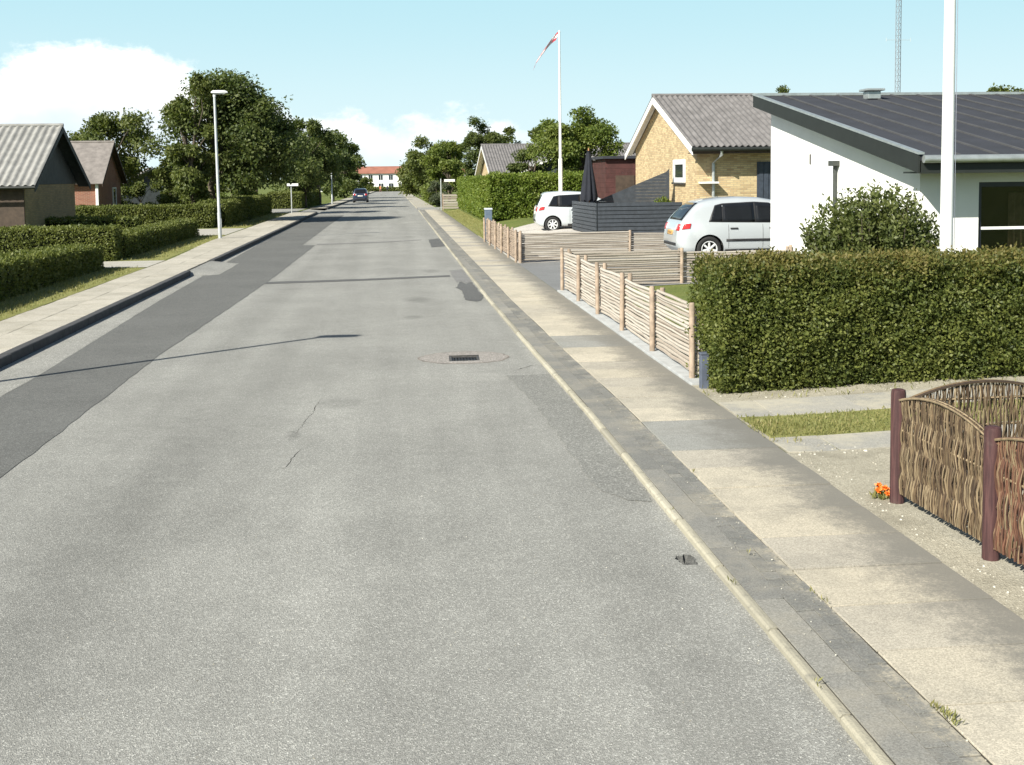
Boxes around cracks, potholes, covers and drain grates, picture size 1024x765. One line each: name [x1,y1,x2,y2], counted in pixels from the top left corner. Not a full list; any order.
pothole [675,554,698,566]
